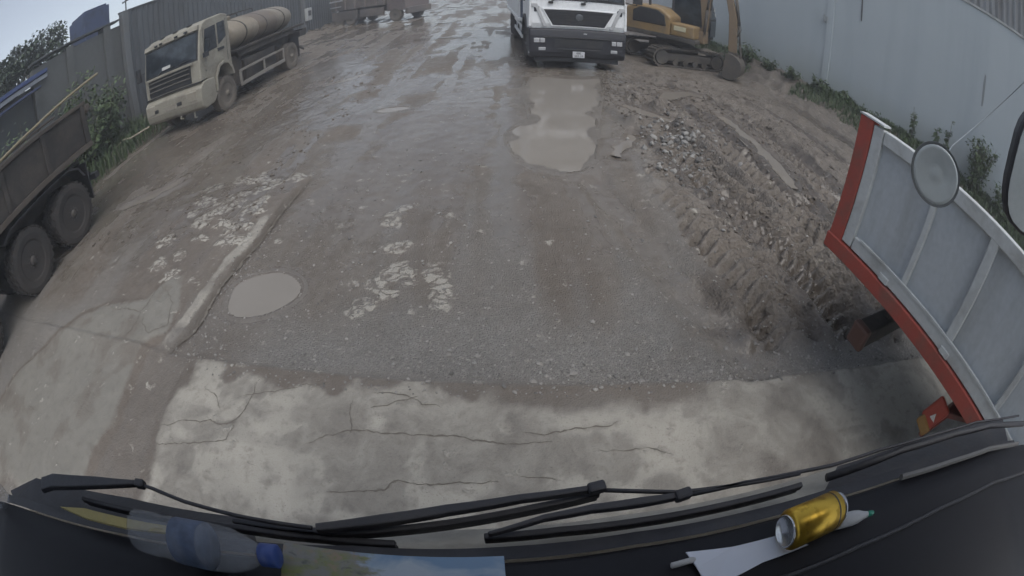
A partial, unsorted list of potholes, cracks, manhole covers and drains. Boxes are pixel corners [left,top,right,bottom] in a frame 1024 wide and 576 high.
crack [373,392,437,407]
crack [310,400,618,445]
crack [331,480,498,492]
pothole [503,77,604,176]
crack [157,379,317,445]
